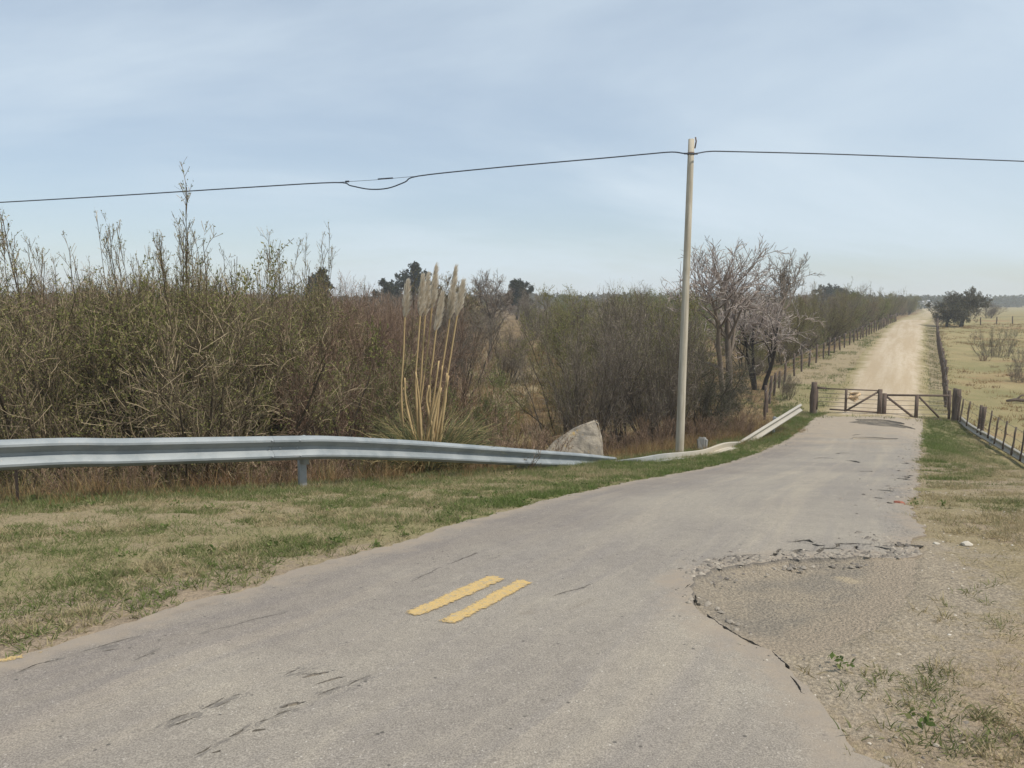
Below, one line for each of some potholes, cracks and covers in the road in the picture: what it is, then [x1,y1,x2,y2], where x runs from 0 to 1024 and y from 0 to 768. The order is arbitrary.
pothole [689,555,918,654]
crack [685,584,804,694]
